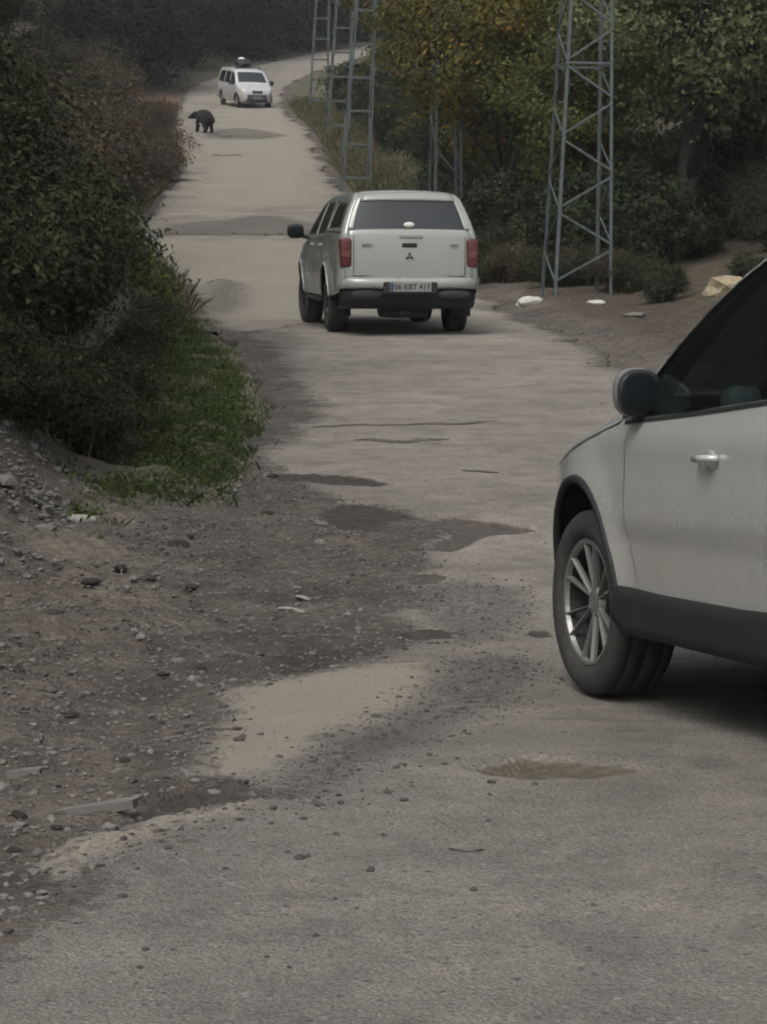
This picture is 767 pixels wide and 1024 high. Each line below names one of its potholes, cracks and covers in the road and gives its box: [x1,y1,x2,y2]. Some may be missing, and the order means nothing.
pothole [469,755,642,780]
crack [314,420,495,442]
